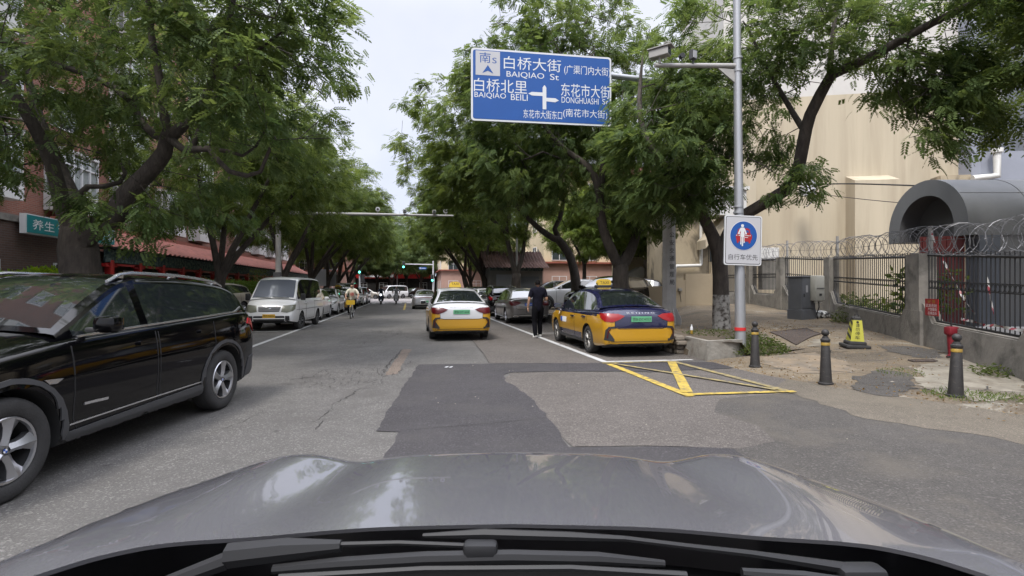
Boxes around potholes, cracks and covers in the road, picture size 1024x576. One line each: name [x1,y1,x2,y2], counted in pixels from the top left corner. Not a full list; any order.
crack [278,330,411,430]
manhole cover [769,328,821,345]
